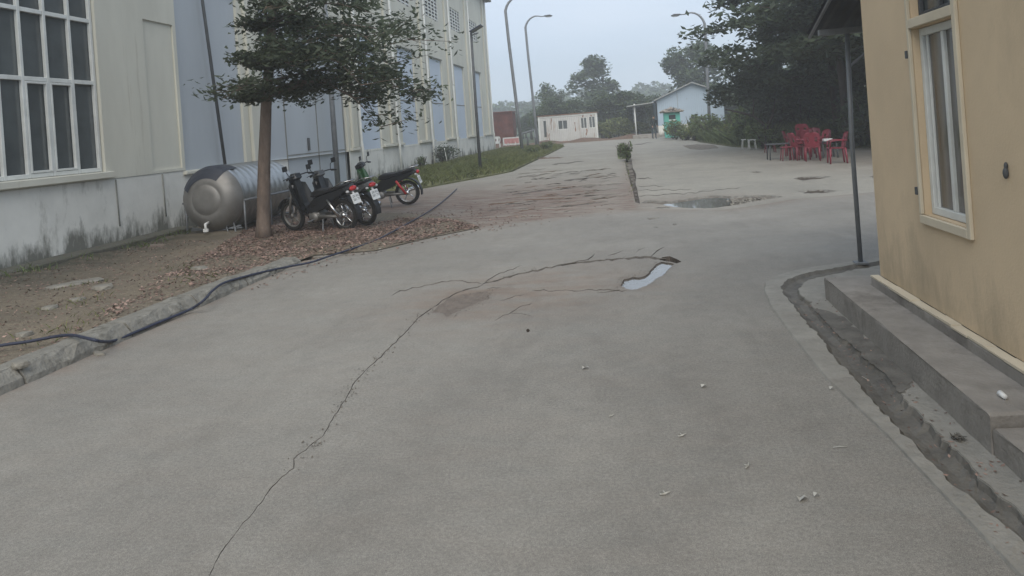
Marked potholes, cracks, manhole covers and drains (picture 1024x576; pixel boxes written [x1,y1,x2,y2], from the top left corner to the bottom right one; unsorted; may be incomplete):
crack [209,247,666,576]
pothole [642,195,781,206]
crack [488,142,740,217]
